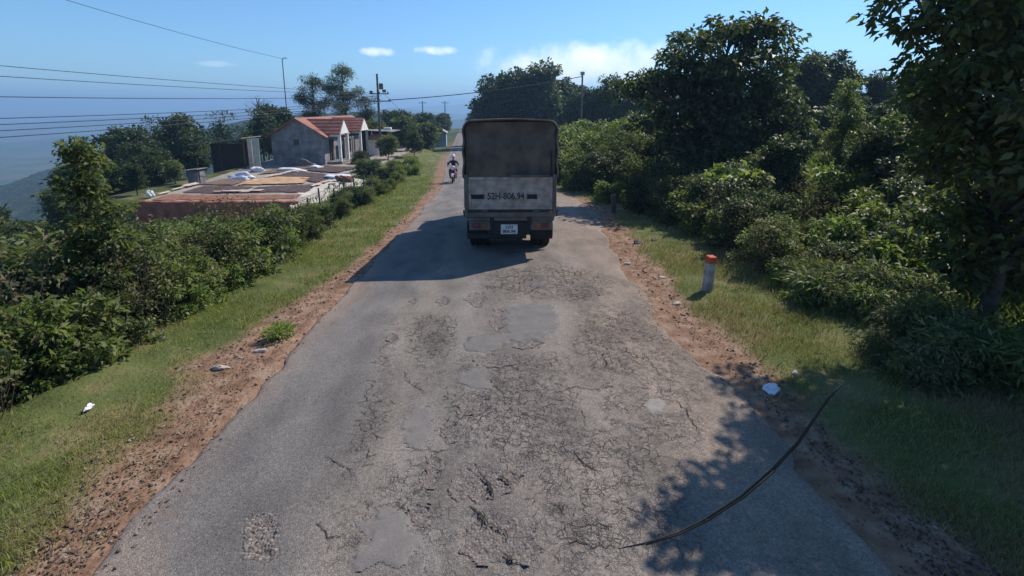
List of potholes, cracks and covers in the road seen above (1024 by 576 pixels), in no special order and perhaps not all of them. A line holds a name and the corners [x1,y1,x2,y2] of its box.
crack [403,314,471,391]
crack [479,263,611,302]
crack [519,427,707,568]
crack [469,472,520,564]
crack [443,314,672,457]
crack [316,380,472,566]
pothole [240,510,282,565]
pothole [448,462,520,505]
